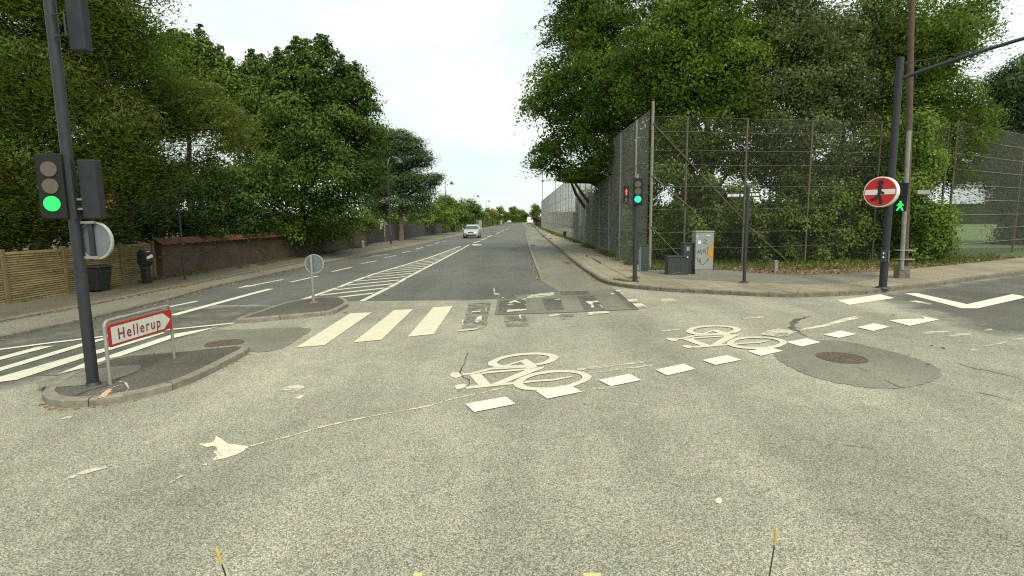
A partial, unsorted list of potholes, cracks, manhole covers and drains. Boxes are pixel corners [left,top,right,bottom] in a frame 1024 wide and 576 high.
manhole cover [816,352,869,364]
manhole cover [204,339,244,347]
crack [788,316,811,336]
